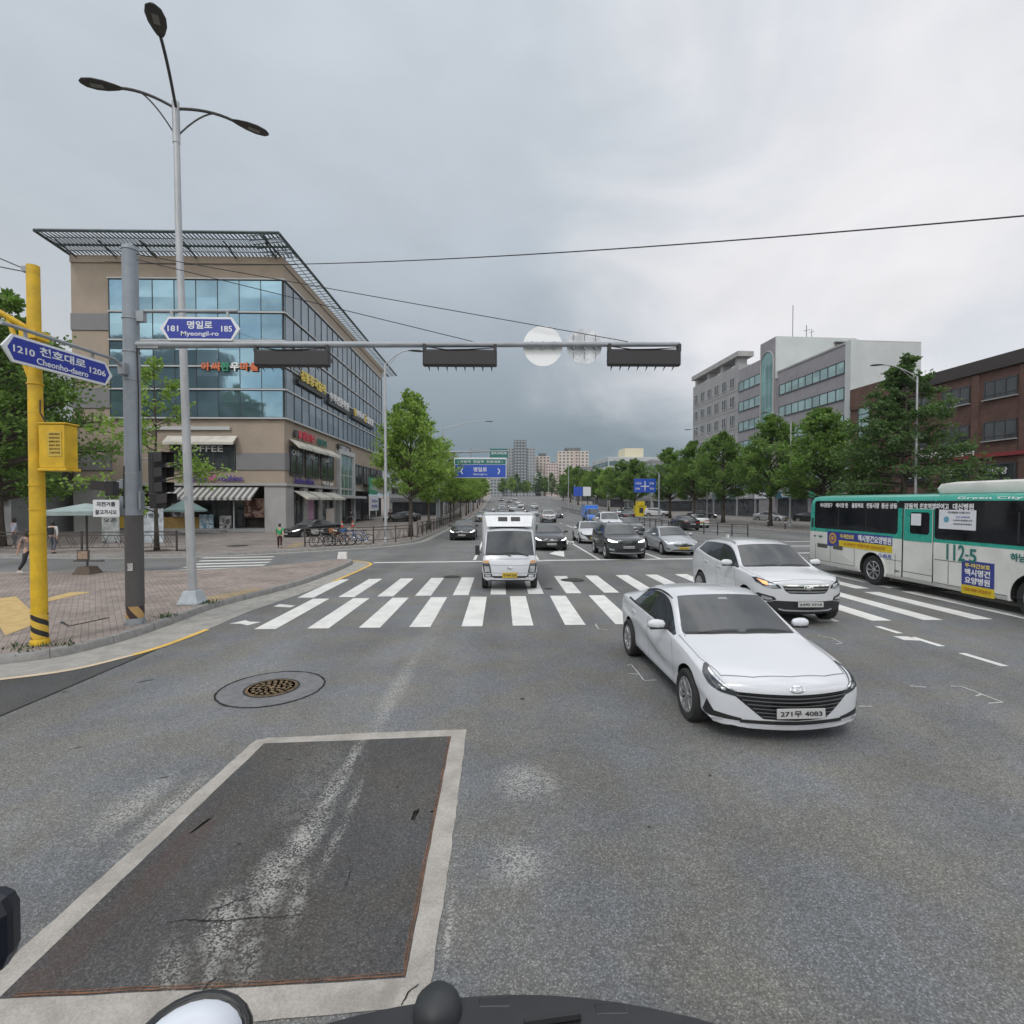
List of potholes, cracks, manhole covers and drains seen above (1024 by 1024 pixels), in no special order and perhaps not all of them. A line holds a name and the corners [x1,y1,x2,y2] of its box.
crack [172,897,300,922]
manhole cover [214,671,326,708]
